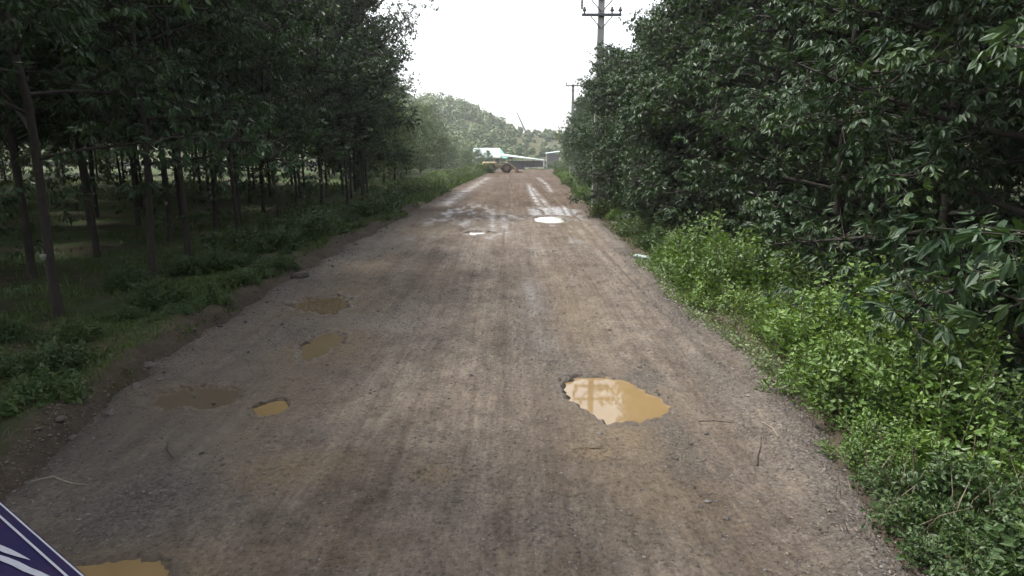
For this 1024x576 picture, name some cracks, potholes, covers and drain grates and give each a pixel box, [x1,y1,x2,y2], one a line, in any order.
pothole [288,326,356,370]
pothole [245,394,298,419]
pothole [124,380,261,416]
pothole [545,366,693,432]
pothole [274,291,364,319]
pothole [527,215,575,225]
pothole [63,544,198,576]
